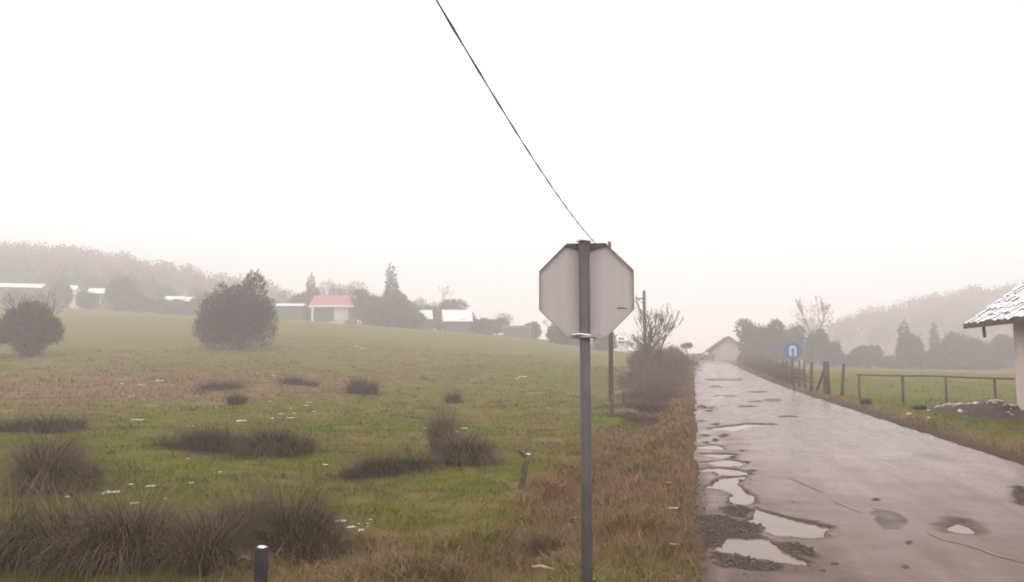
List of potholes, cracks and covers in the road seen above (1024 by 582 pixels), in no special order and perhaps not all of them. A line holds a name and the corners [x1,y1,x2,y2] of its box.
pothole [697,458,752,468]
pothole [730,504,845,542]
crack [926,531,1024,563]
pothole [698,422,788,433]
pothole [697,475,771,508]
crack [788,477,860,512]
pothole [705,533,823,571]
pothole [920,515,1003,537]
